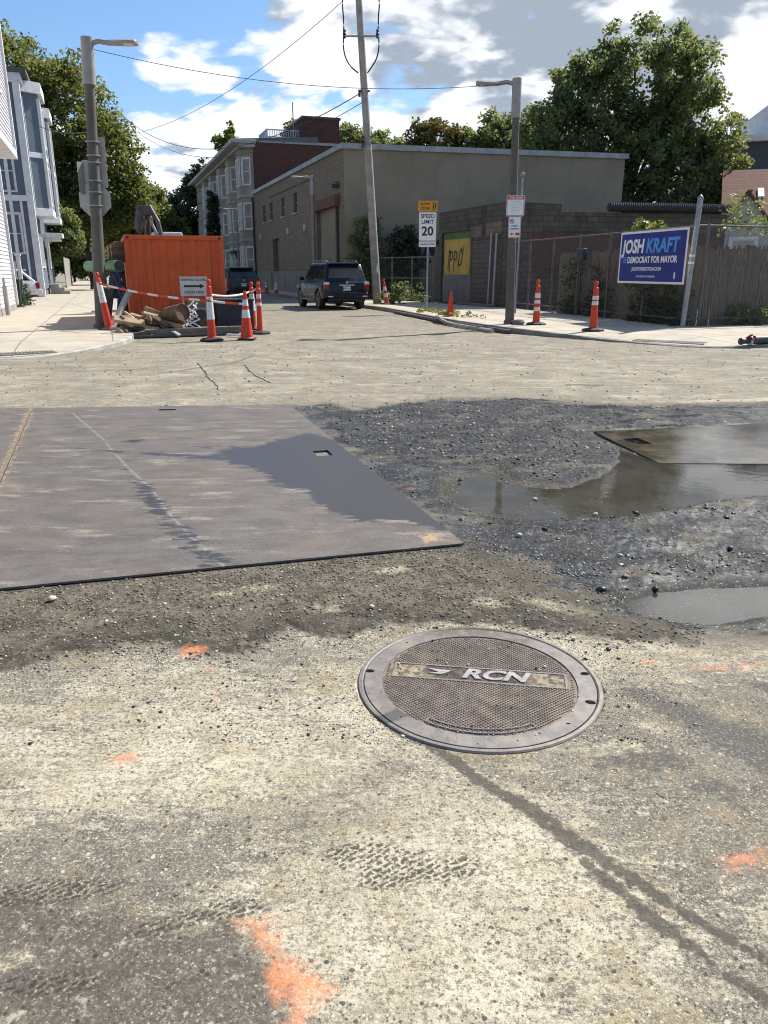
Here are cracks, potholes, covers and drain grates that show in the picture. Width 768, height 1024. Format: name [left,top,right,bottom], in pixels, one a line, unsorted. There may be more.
manhole cover [358,627,604,755]
pothole [609,580,768,629]
pothole [433,446,768,521]
